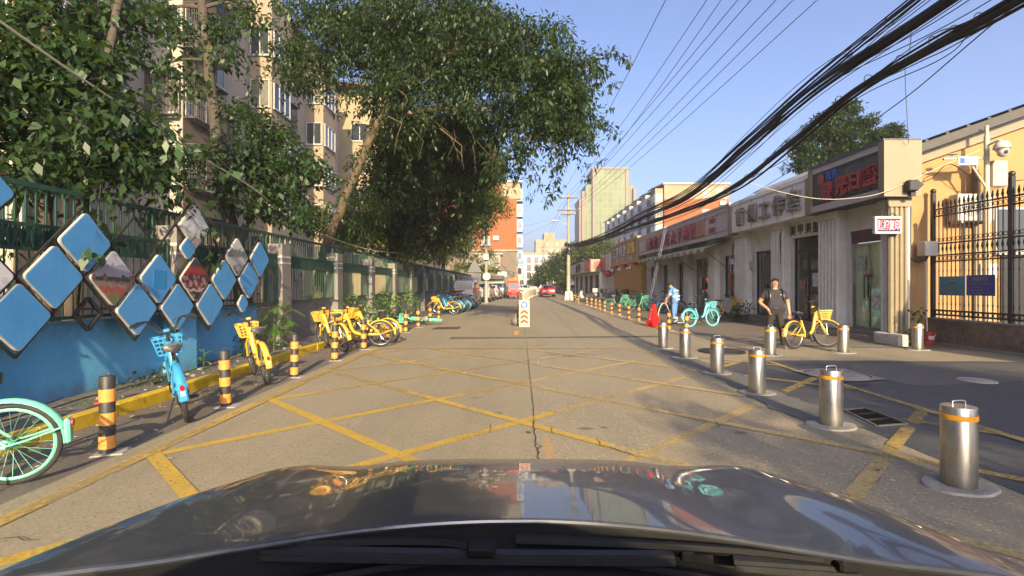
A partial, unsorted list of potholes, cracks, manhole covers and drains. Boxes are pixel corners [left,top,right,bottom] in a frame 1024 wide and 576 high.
crack [525,332,559,459]
manhole cover [793,368,884,381]
drain grate [844,407,909,427]
